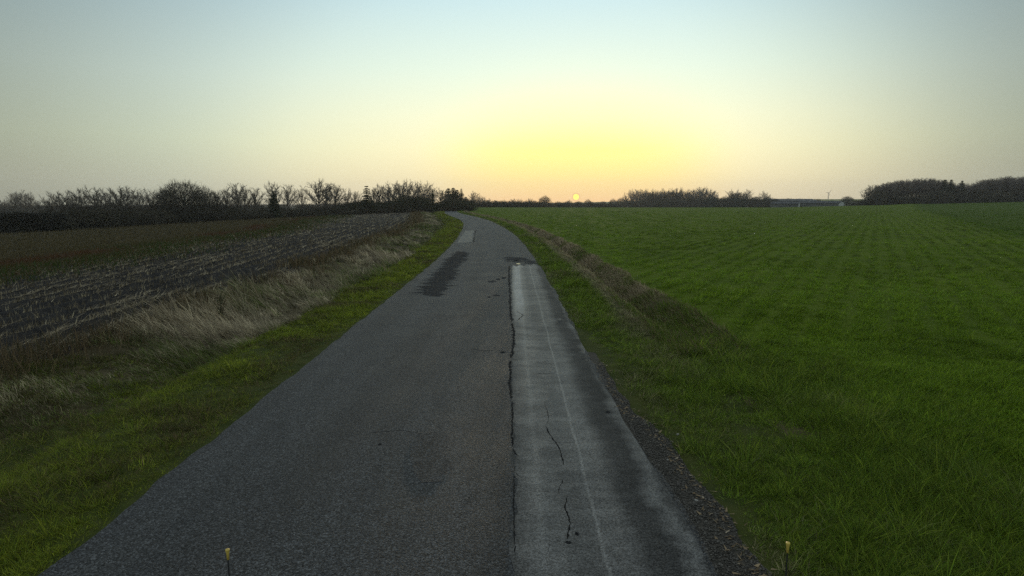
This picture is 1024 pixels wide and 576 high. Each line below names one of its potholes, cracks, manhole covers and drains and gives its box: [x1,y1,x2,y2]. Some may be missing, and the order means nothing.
crack [544,402,571,539]
